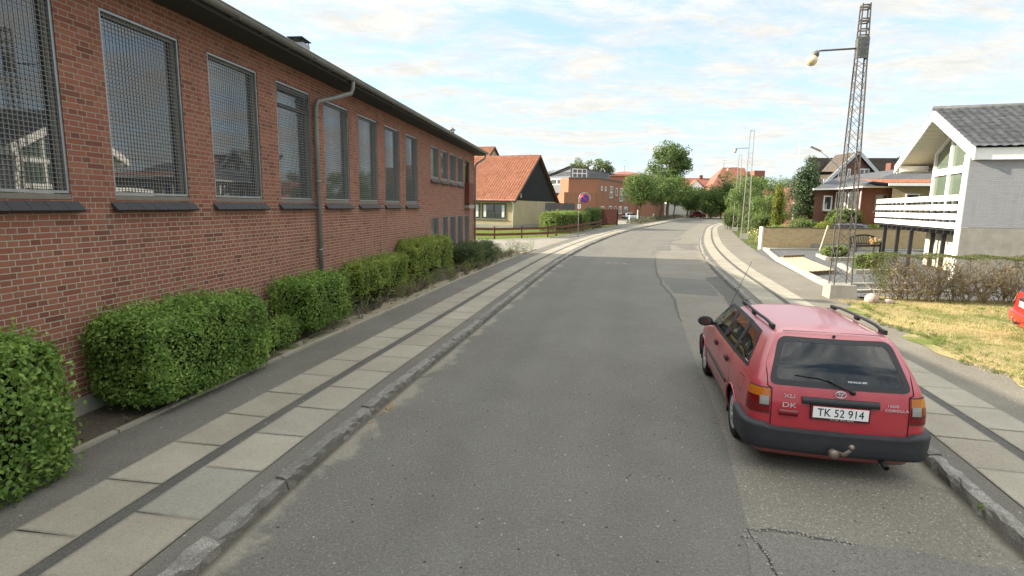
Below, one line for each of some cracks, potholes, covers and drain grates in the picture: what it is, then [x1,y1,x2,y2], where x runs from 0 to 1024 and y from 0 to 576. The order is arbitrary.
crack [741,526,857,576]
